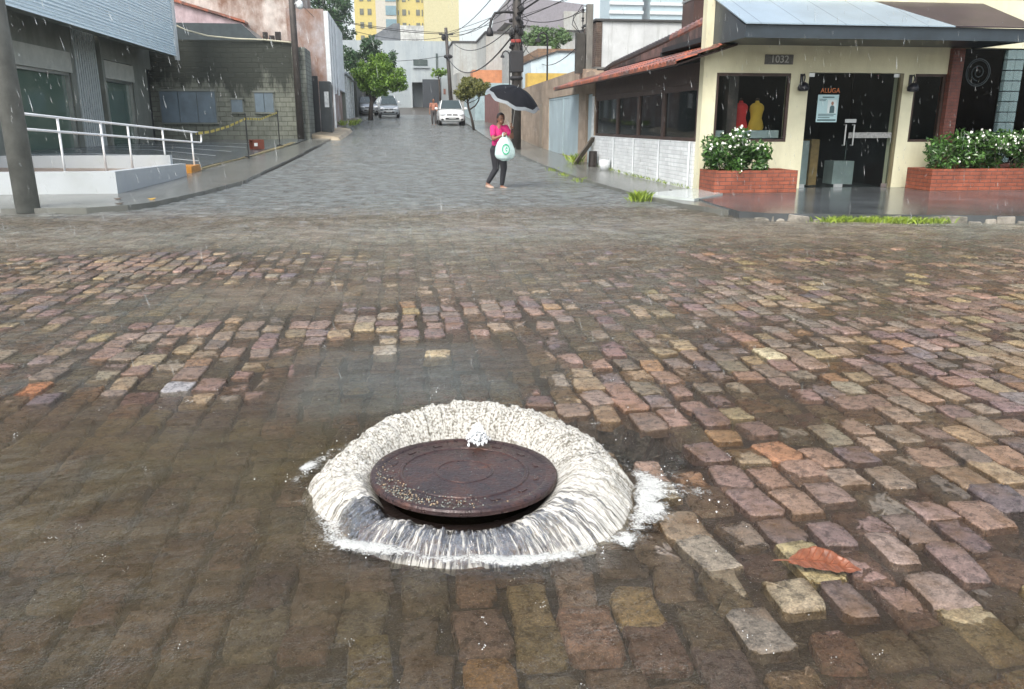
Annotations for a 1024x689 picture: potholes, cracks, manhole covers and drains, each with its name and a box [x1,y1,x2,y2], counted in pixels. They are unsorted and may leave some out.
manhole cover [370,438,557,550]
